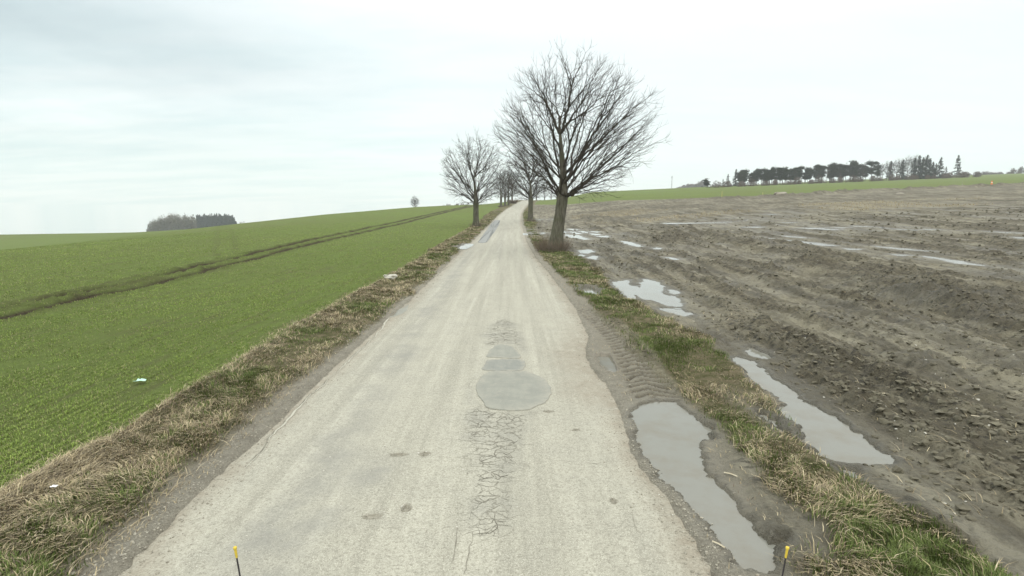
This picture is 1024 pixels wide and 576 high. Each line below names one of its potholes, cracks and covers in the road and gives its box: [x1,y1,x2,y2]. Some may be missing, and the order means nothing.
crack [451,402,534,572]
crack [479,319,531,348]
